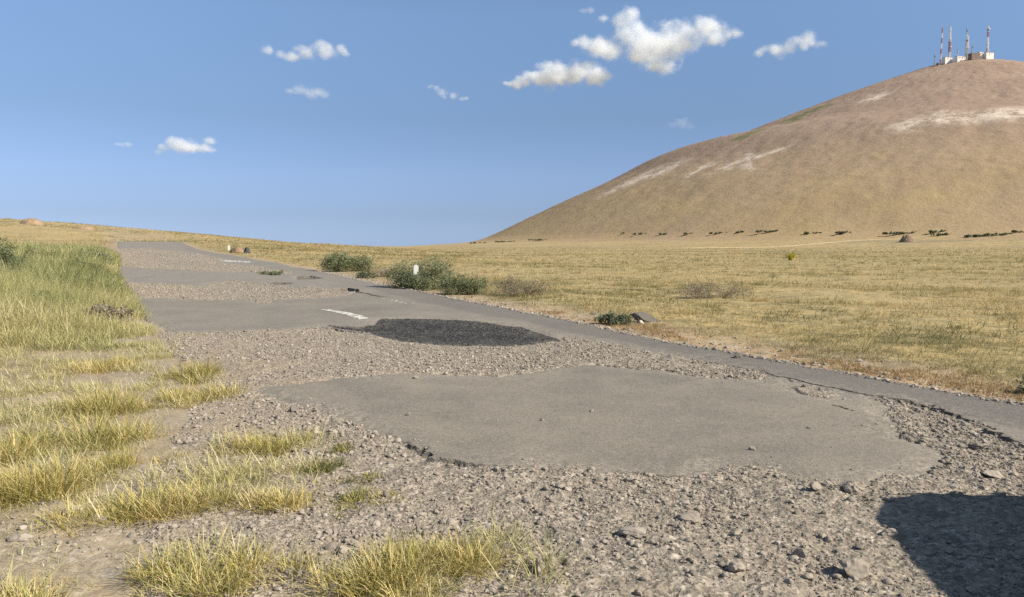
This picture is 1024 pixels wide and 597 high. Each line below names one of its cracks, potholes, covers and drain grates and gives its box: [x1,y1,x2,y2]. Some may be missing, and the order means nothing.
pothole [126,279,356,300]
pothole [120,248,292,274]
pothole [147,318,767,394]
crack [765,373,883,411]
